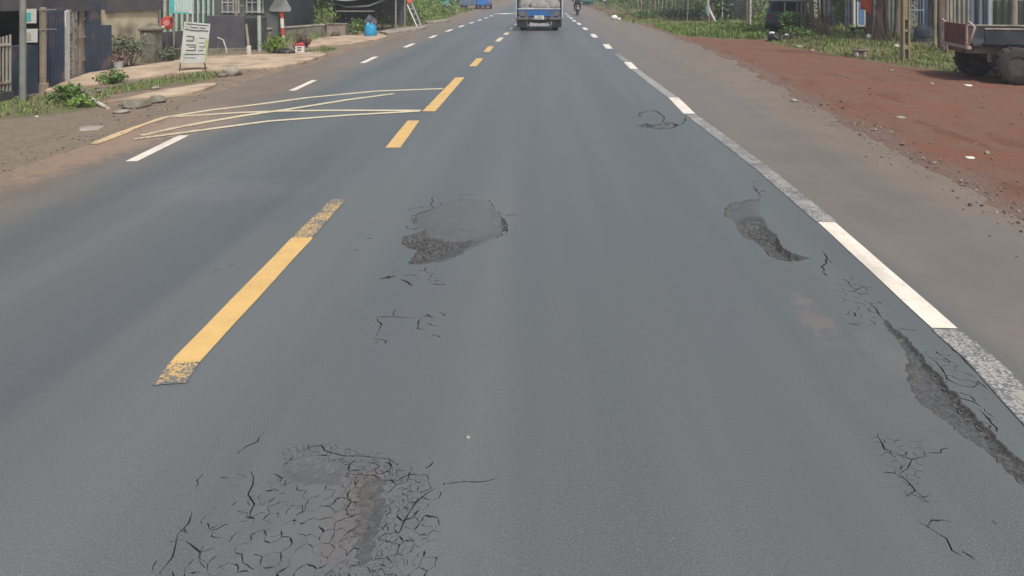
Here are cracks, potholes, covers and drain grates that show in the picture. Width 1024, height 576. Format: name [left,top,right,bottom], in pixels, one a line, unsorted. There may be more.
pothole [724,186,808,262]
pothole [882,319,1024,487]
crack [376,310,445,343]
pothole [366,194,516,285]
crack [874,433,997,559]
crack [835,276,882,326]
